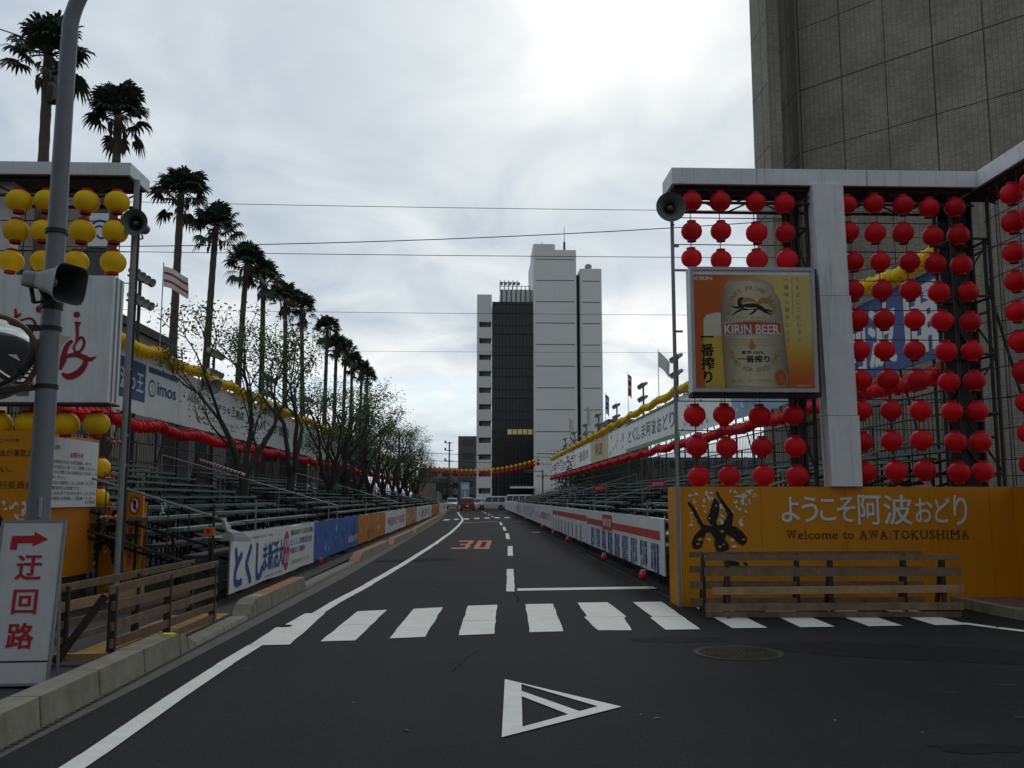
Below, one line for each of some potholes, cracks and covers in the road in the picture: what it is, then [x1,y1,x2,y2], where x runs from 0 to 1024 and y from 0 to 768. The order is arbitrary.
manhole cover [692,645,785,661]
